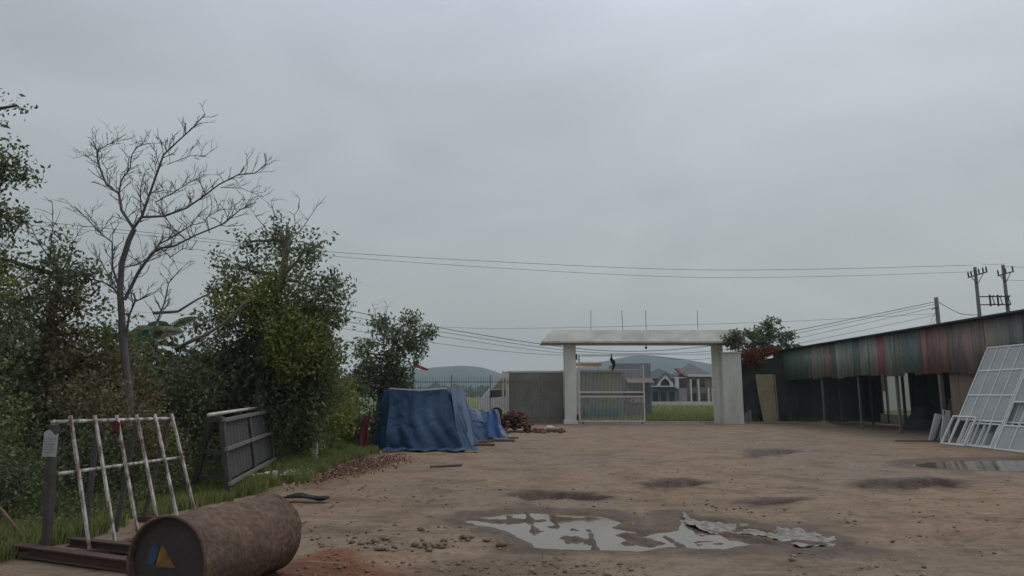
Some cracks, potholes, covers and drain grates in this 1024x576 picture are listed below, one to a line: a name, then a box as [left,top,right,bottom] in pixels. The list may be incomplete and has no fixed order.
pothole [849,476,968,490]
pothole [743,448,799,457]
pothole [451,508,849,552]
pothole [897,457,1024,471]
pothole [639,478,707,488]
pothole [509,489,614,501]
